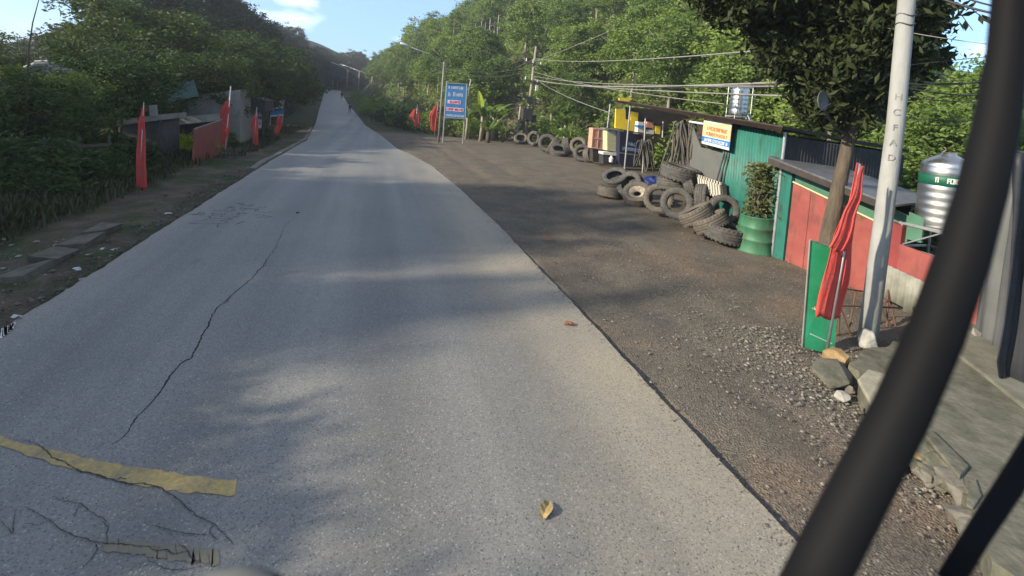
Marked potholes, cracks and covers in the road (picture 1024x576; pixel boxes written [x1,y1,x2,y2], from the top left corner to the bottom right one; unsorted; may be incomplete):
crack [113,212,300,444]
crack [0,440,234,571]
